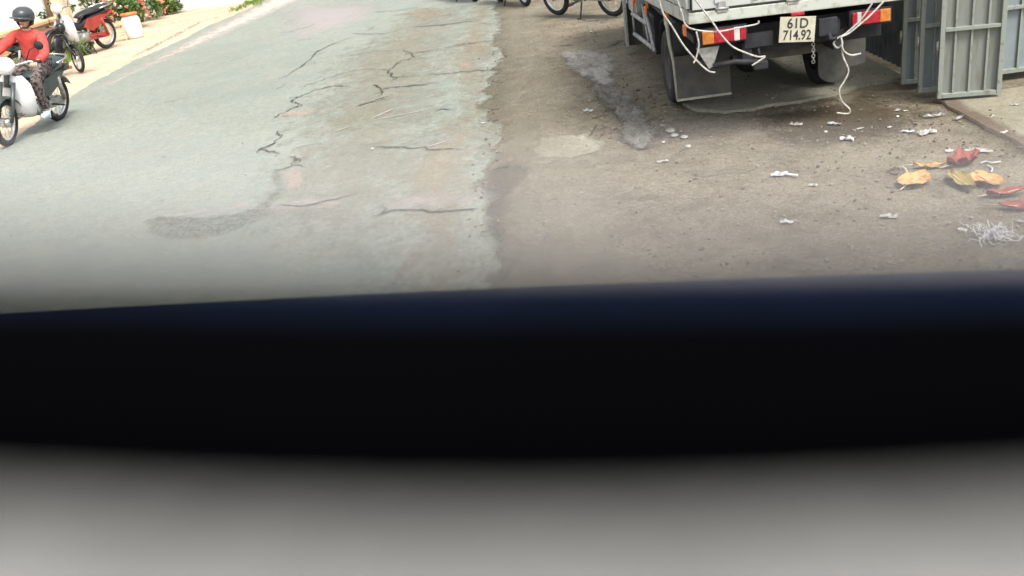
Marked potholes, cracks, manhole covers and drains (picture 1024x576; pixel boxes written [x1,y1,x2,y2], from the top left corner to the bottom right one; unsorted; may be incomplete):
crack [216,7,503,171]
